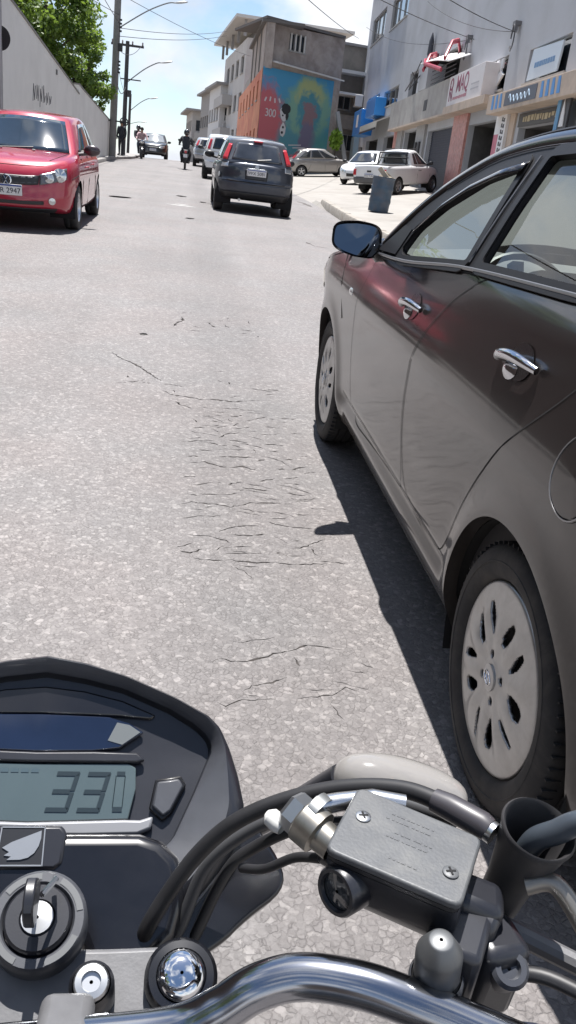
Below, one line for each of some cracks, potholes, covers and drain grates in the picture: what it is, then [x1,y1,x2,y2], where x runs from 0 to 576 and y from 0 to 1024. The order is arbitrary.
crack [174,316,259,337]
crack [209,637,373,719]
crack [112,352,343,578]
